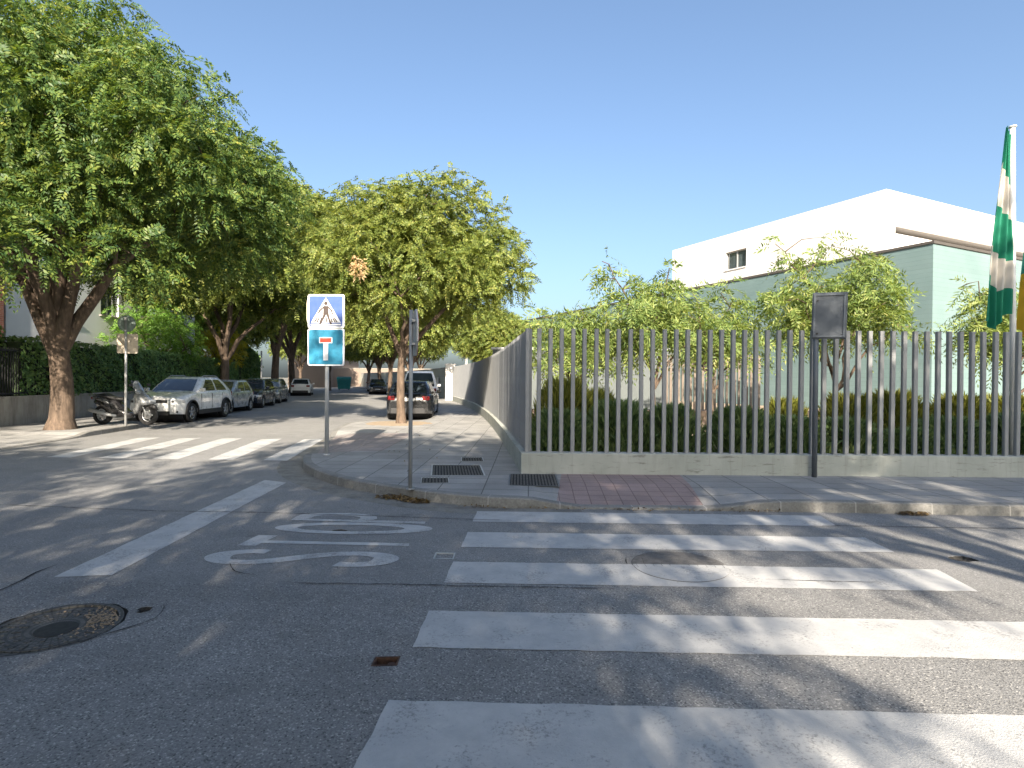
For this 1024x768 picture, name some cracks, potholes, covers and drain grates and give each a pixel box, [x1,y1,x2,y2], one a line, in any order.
manhole cover [0,603,128,657]
utility cover [371,656,400,666]
drain grate [508,474,560,487]
manhole cover [631,551,729,582]
